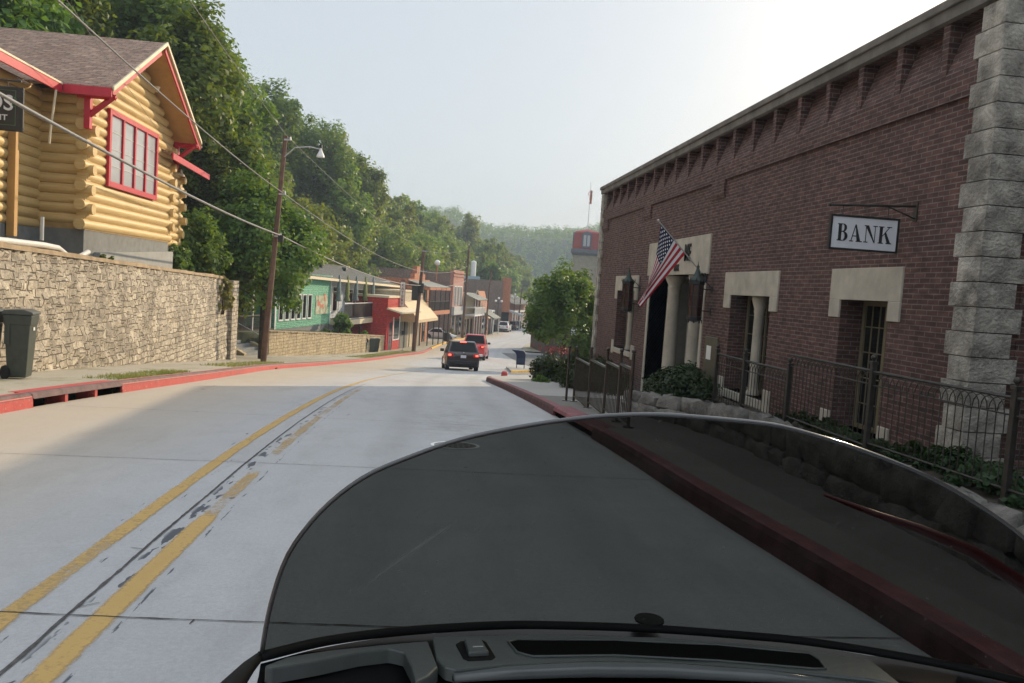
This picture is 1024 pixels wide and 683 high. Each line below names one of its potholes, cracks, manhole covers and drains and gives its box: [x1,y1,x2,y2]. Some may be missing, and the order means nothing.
drain grate [9,380,123,407]
